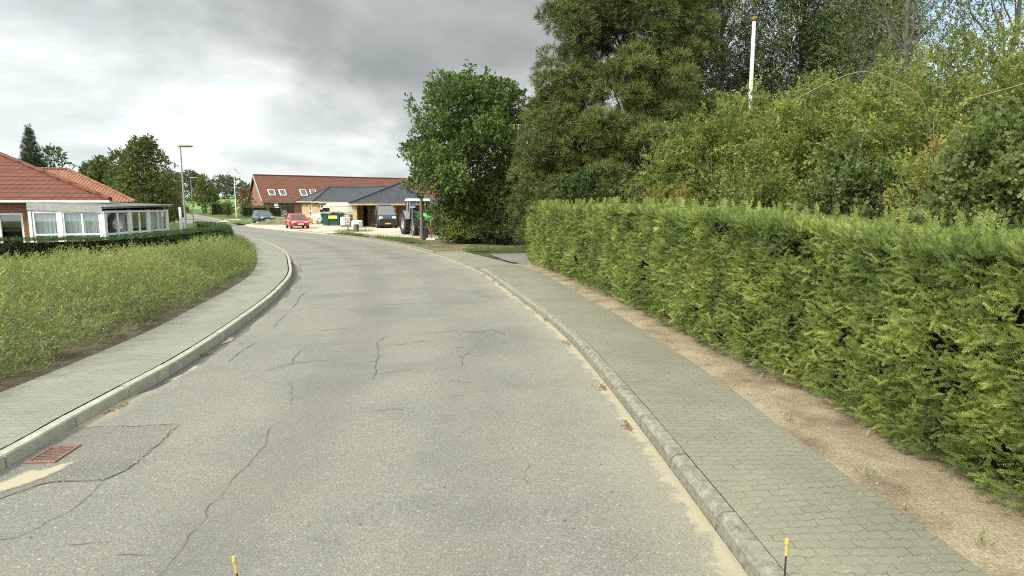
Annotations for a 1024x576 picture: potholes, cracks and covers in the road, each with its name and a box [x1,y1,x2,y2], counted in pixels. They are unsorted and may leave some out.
crack [368,330,504,382]
drain grate [23,444,82,464]
crack [159,420,281,576]
crack [6,422,223,539]
